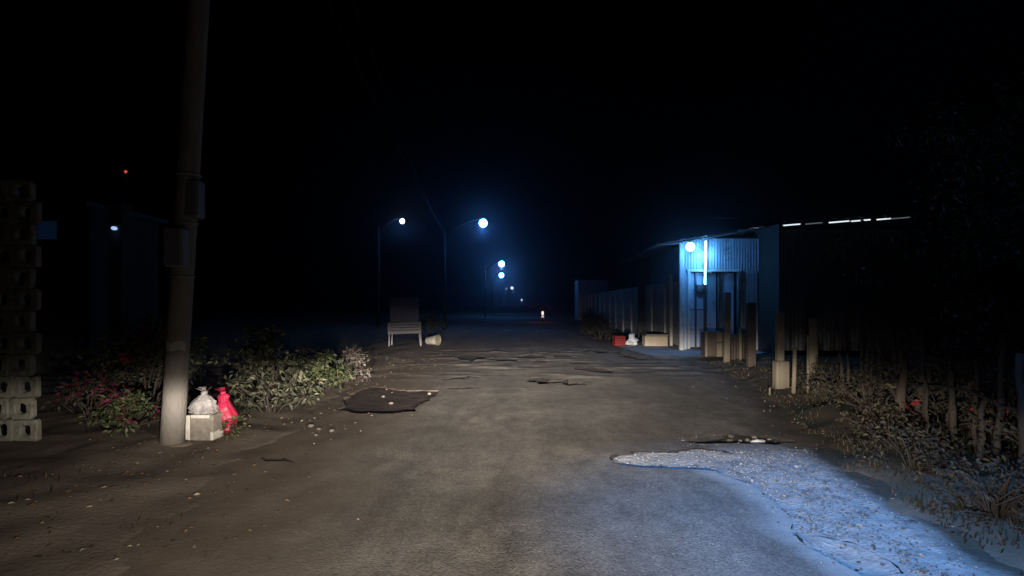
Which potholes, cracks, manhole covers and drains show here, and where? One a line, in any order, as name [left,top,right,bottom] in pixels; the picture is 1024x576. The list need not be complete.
pothole [455,354,486,362]
pothole [683,434,799,450]
